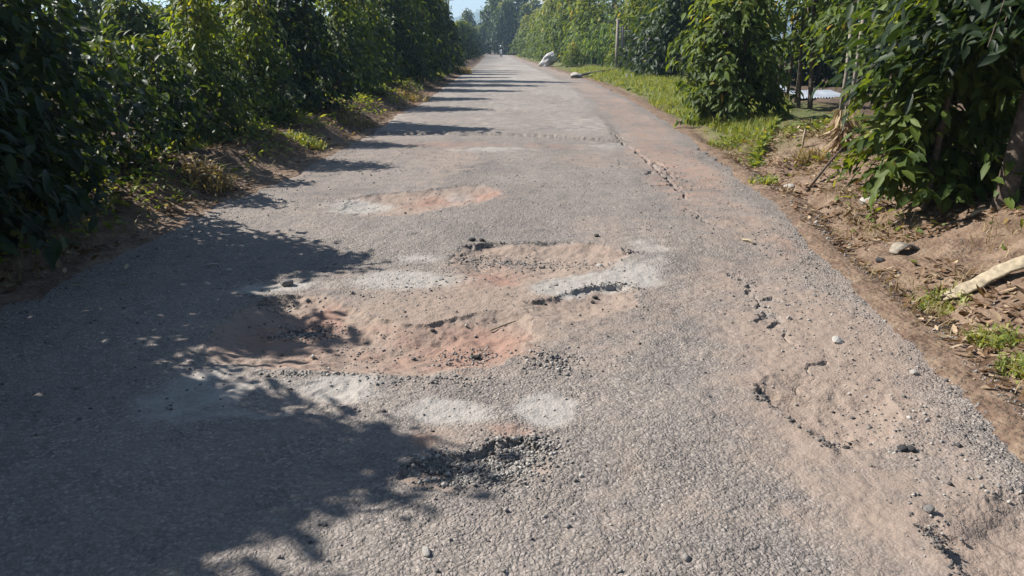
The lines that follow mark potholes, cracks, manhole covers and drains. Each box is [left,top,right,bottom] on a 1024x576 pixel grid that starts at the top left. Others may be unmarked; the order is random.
pothole [199,293,540,377]
crack [377,130,727,231]
crack [726,272,831,378]
pothole [338,183,503,217]
pothole [392,438,556,493]
pothole [524,285,641,323]
pothole [444,241,631,287]
